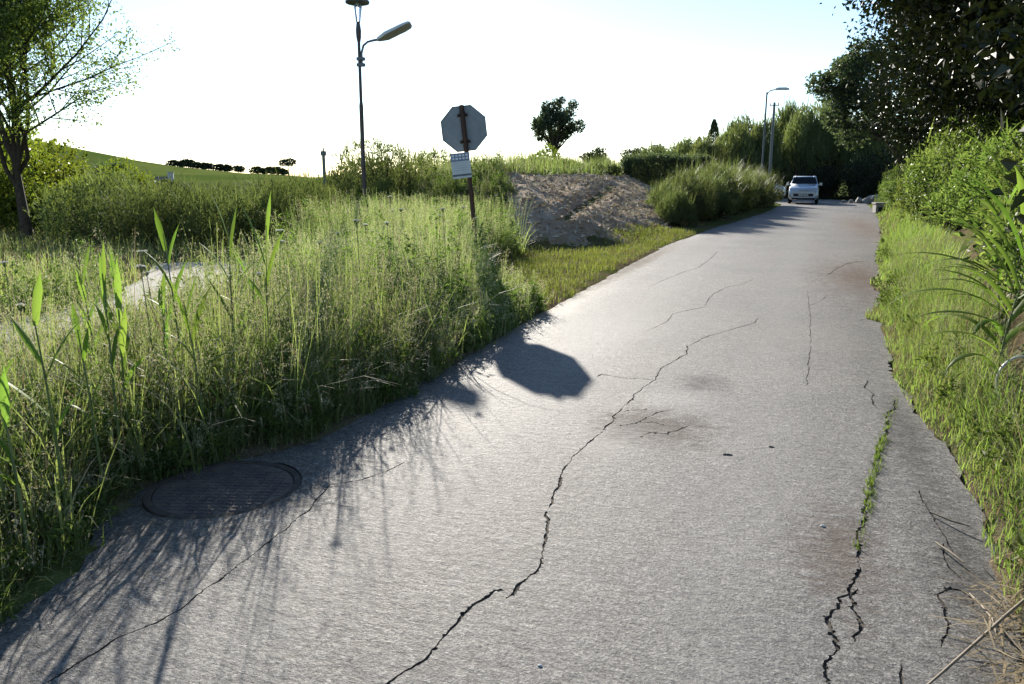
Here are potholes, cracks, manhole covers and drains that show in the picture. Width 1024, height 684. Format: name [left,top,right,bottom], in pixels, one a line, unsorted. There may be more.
crack [806,291,824,384]
crack [44,462,404,684]
crack [822,380,897,684]
crack [386,318,758,684]
crack [918,490,975,647]
manhole cover [143,461,302,519]
